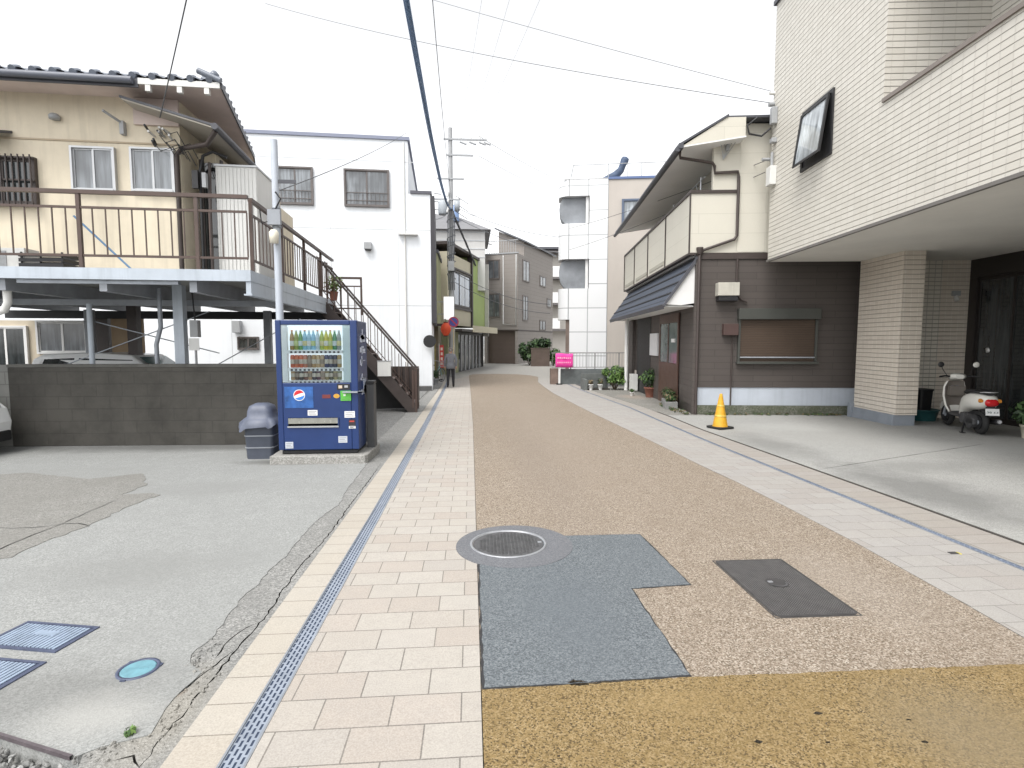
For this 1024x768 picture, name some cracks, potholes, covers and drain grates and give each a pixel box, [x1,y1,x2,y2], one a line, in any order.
crack [117,466,379,768]
manhole cover [456,525,573,568]
manhole cover [712,559,863,618]
utility cover [115,657,164,682]
